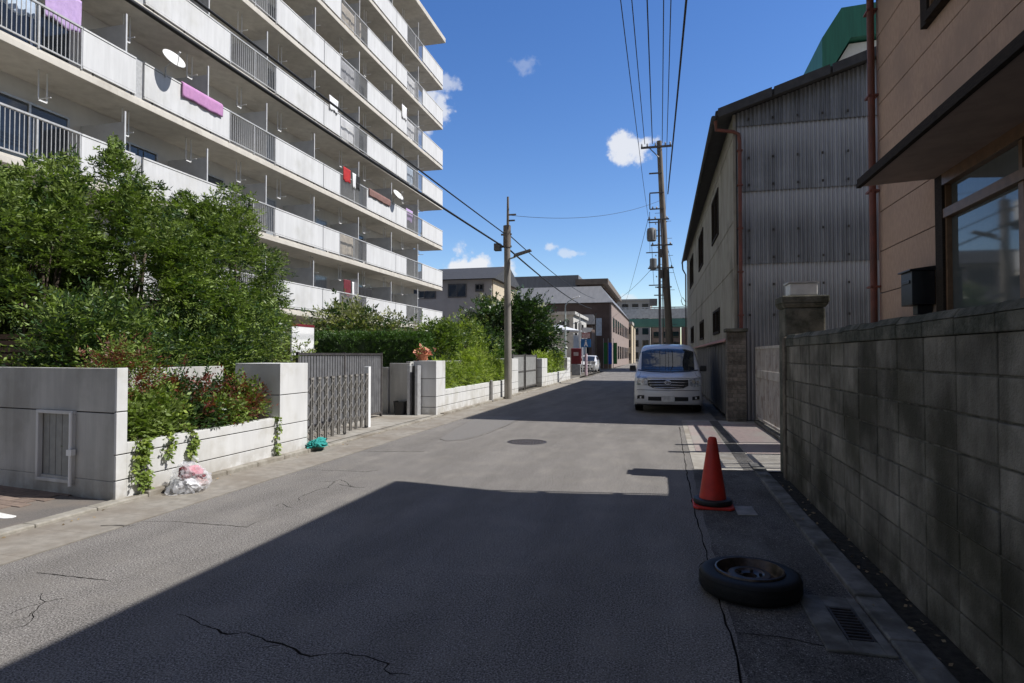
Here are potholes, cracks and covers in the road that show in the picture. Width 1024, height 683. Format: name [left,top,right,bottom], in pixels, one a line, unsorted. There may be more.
crack [8,594,64,629]
crack [177,614,410,675]
drain grate [799,594,899,659]
